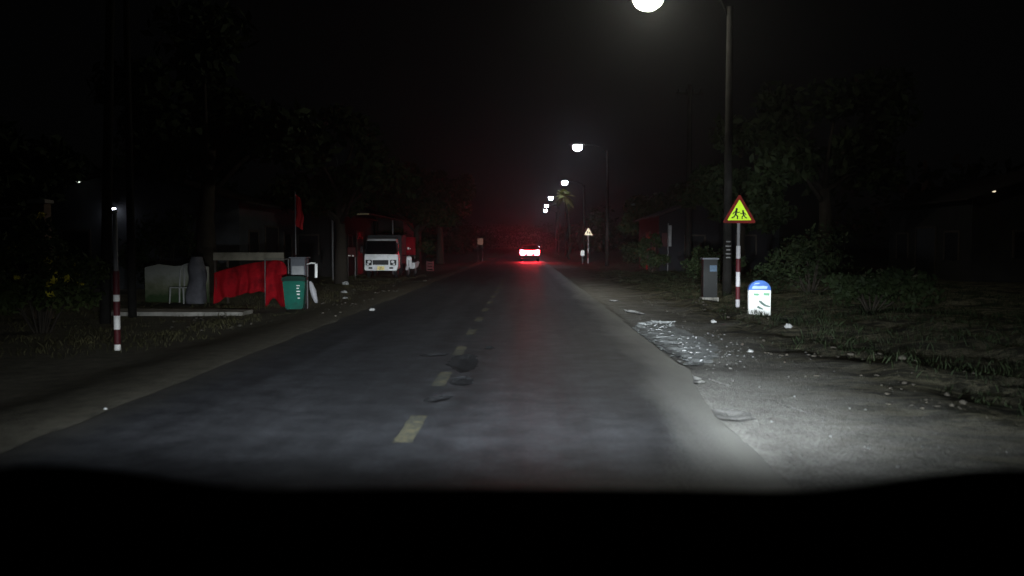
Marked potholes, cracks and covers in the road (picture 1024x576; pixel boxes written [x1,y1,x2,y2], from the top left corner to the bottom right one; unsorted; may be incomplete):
pothole [424,395,453,403]
pothole [446,354,478,373]
pothole [450,376,474,386]
pothole [711,408,755,422]
pothole [633,321,721,366]
